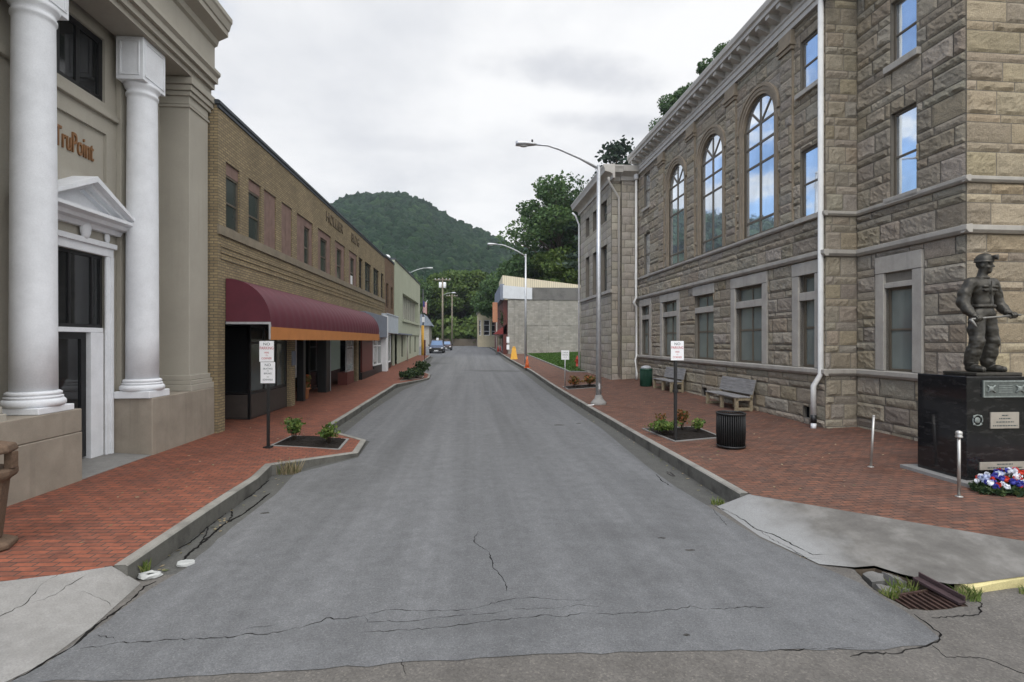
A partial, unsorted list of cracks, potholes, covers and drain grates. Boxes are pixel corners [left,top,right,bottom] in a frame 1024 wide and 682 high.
crack [178,480,270,560]
crack [473,534,507,590]
crack [759,600,1024,674]
crack [12,581,772,681]
drain grate [889,589,972,610]
